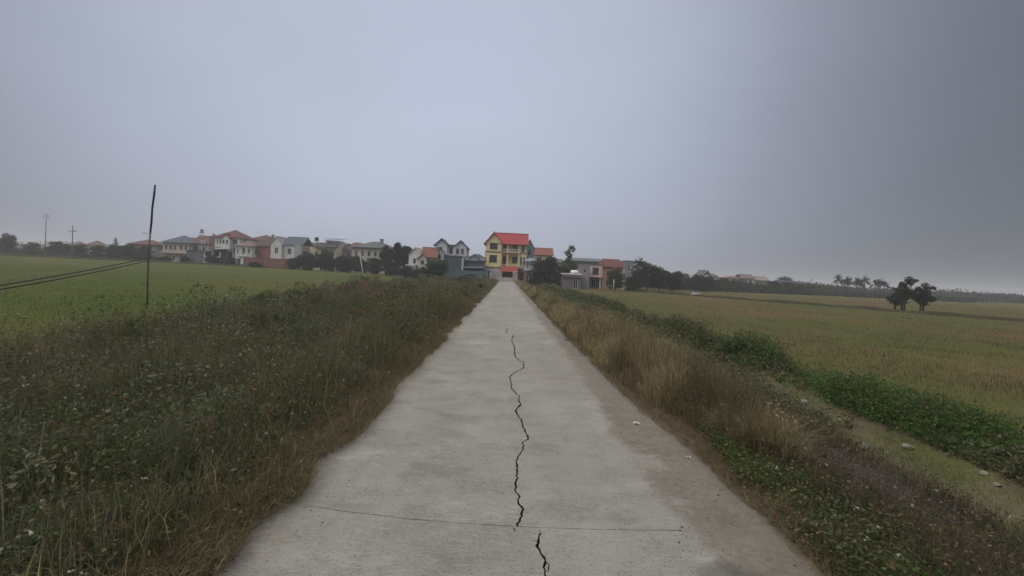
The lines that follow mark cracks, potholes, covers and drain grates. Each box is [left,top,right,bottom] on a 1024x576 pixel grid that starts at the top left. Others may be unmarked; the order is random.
crack [506,330,550,576]
